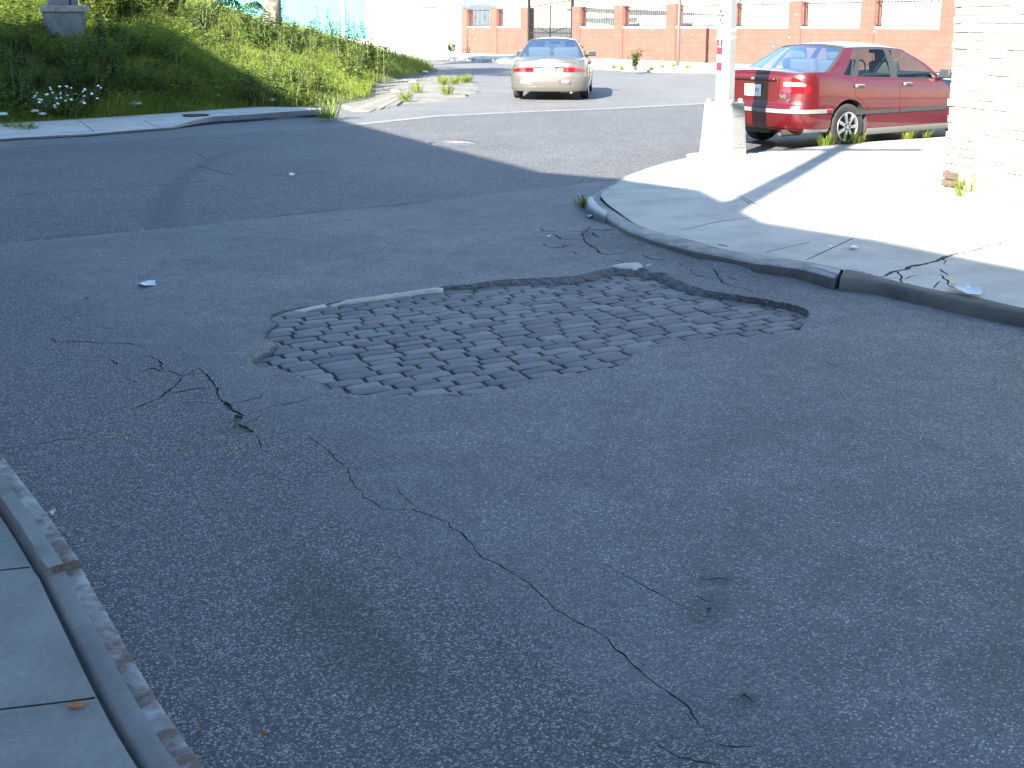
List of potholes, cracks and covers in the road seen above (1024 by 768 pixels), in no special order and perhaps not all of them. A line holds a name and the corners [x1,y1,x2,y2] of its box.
crack [540,227,752,292]
crack [27,326,318,450]
crack [853,258,955,289]
crack [306,435,752,766]
